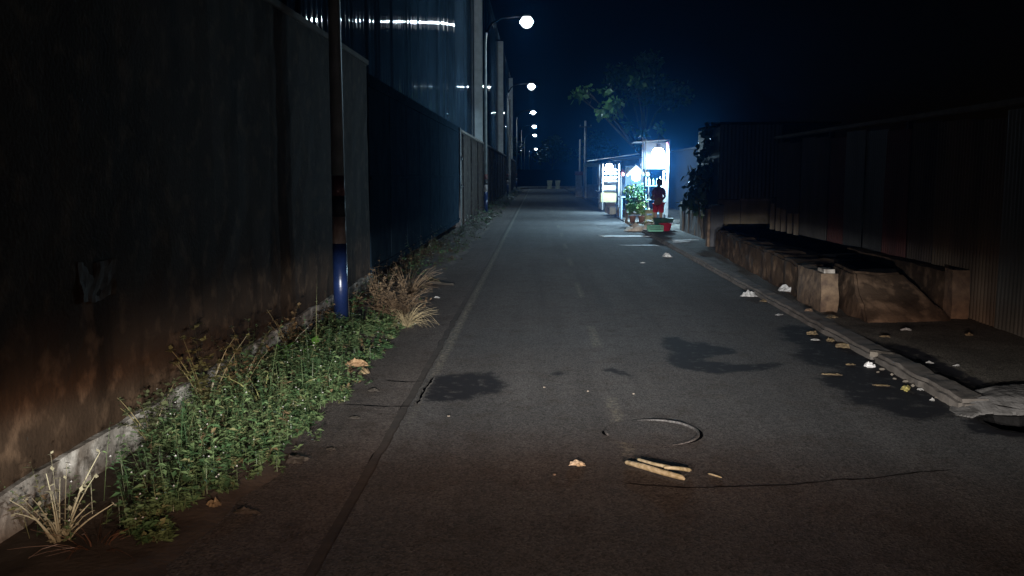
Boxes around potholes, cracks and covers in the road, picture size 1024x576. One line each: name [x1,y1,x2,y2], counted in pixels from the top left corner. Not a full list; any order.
manhole cover [602,419,703,446]
crack [627,470,947,488]
